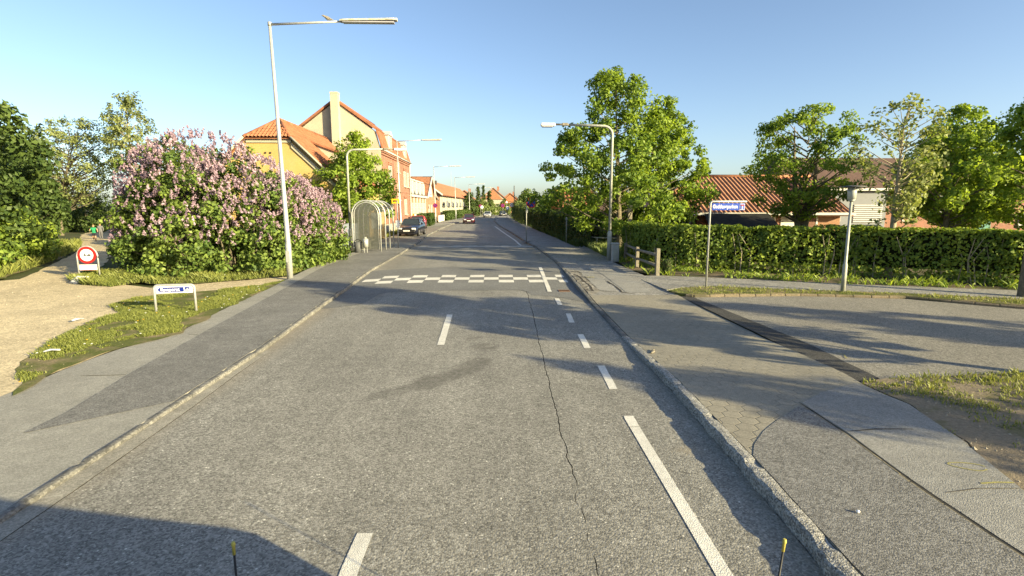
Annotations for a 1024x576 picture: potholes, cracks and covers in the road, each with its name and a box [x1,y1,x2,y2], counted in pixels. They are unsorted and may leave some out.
crack [574,274,626,293]
crack [526,292,598,575]
